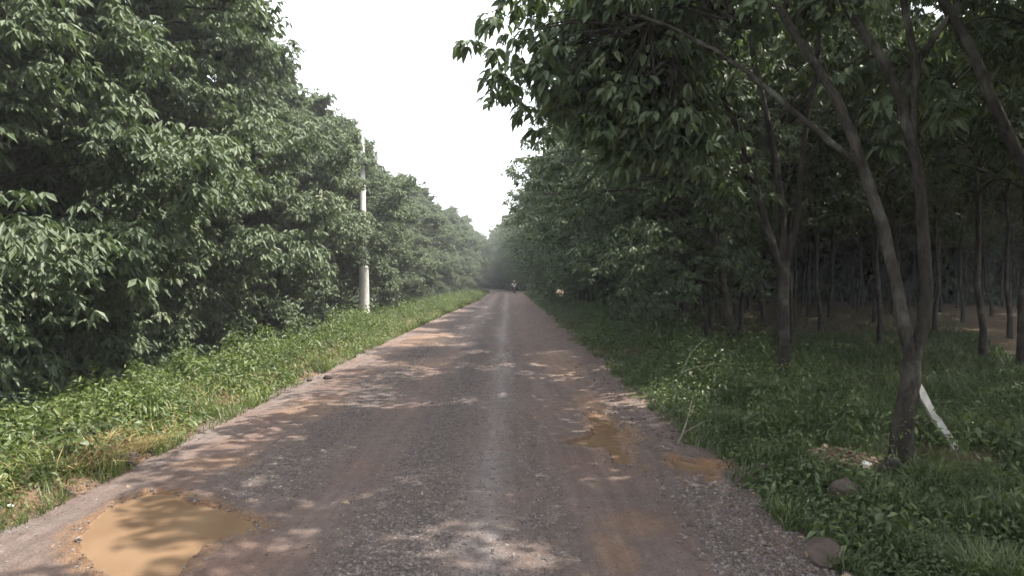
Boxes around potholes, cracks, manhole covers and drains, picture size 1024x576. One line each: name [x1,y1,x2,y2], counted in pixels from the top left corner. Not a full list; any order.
pothole [555,409,649,469]
pothole [659,452,740,481]
pothole [54,485,275,576]
